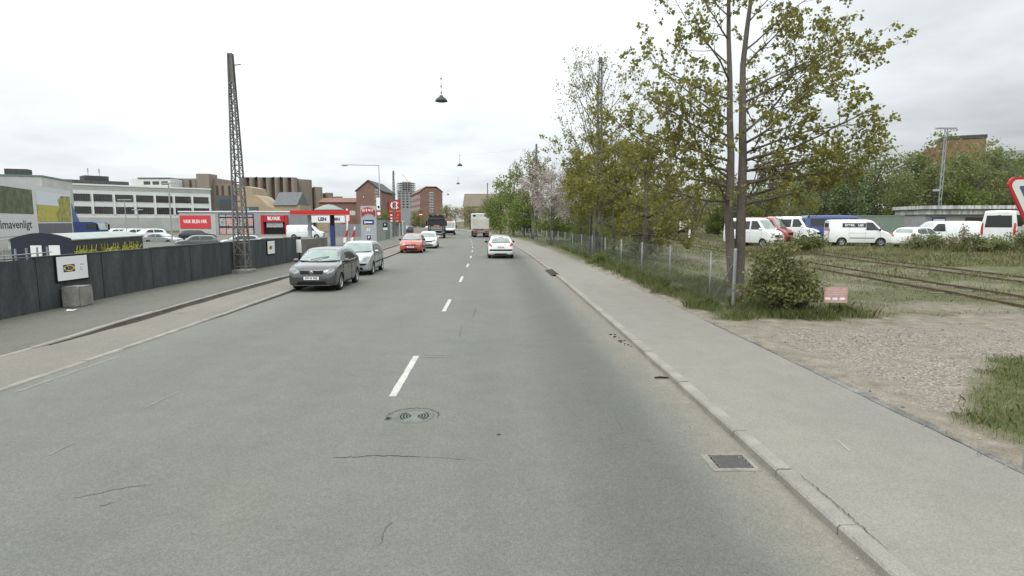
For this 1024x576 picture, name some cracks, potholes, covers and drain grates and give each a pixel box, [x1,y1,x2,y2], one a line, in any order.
manhole cover [393,410,435,424]
drain grate [700,454,762,471]
